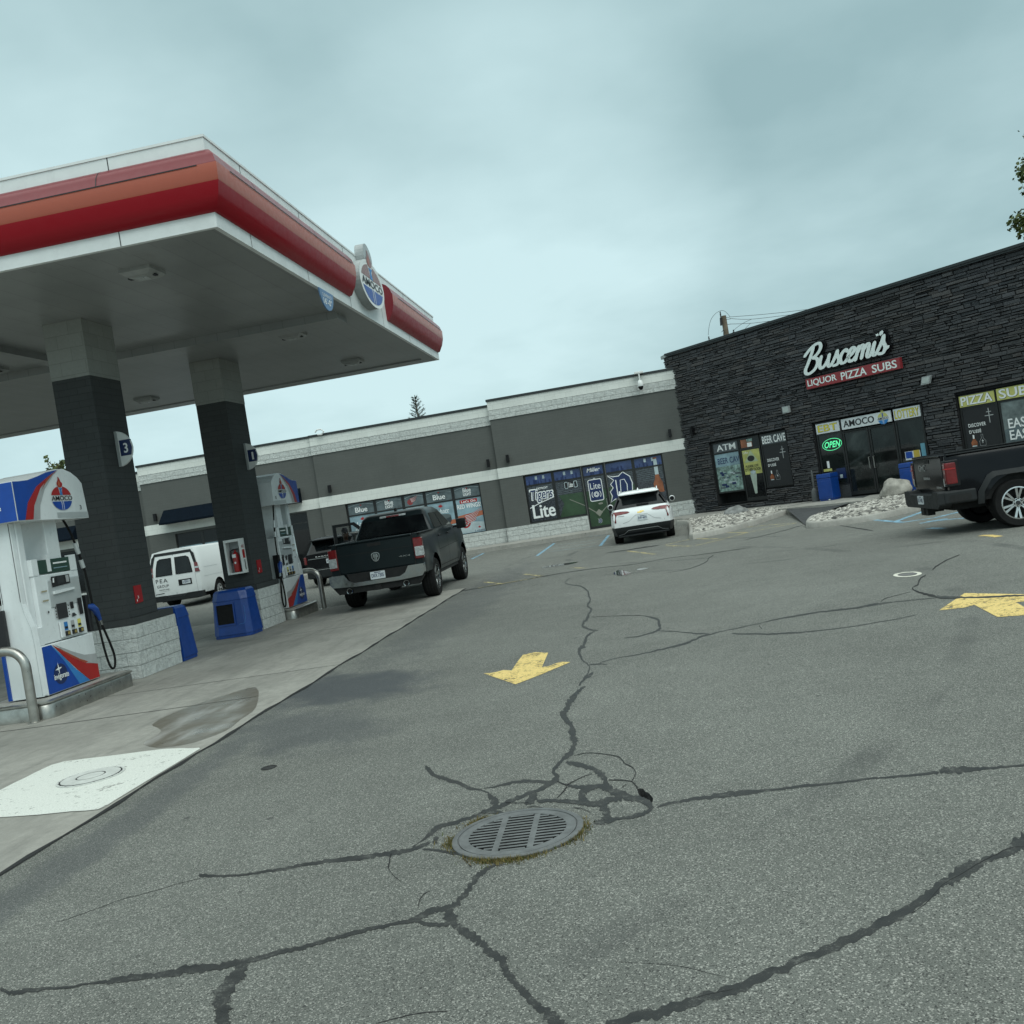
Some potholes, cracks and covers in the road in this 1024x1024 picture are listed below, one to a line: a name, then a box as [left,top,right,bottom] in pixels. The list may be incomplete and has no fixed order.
crack [912,555,1024,599]
manhole cover [56,766,125,788]
pothole [637,788,653,803]
crack [732,615,915,635]
crack [378,1011,444,1023]
